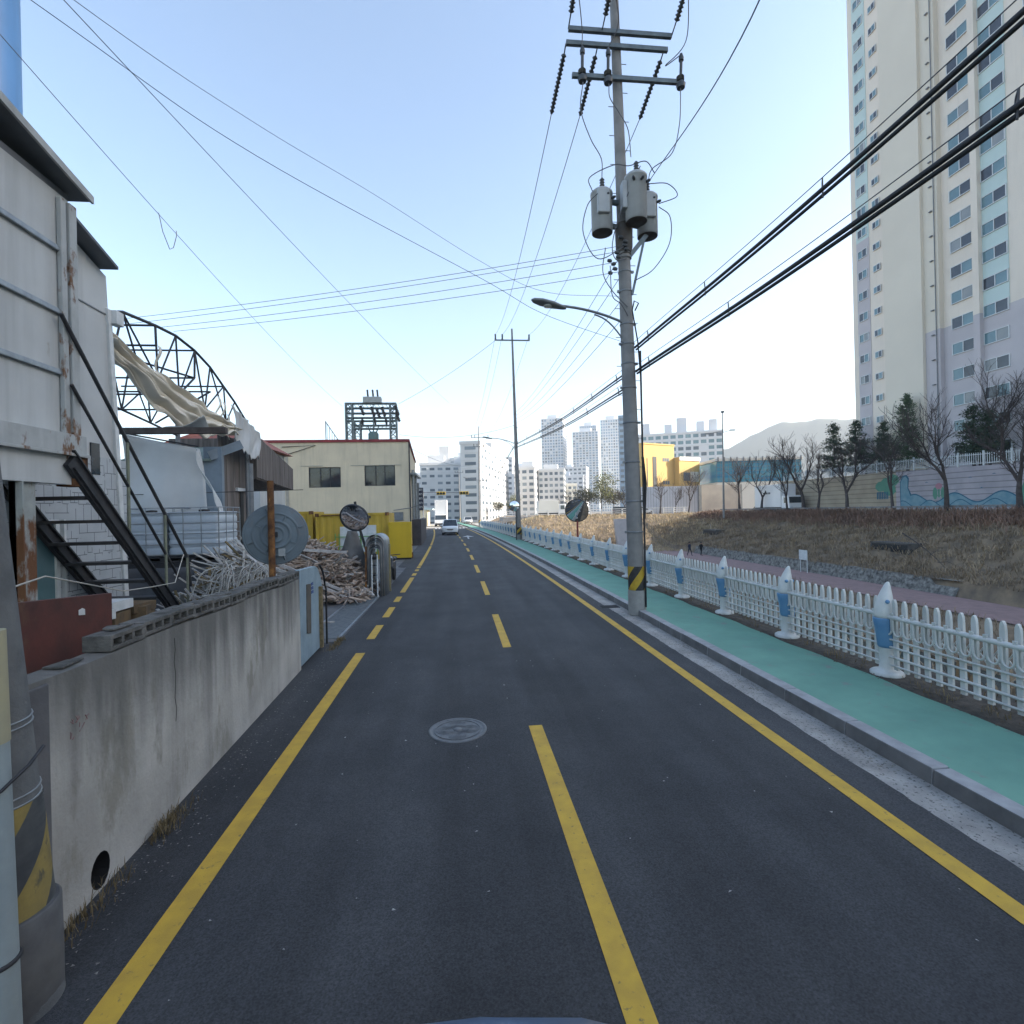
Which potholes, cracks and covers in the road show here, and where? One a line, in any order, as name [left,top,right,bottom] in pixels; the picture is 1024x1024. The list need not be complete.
manhole cover [428,718,487,743]
